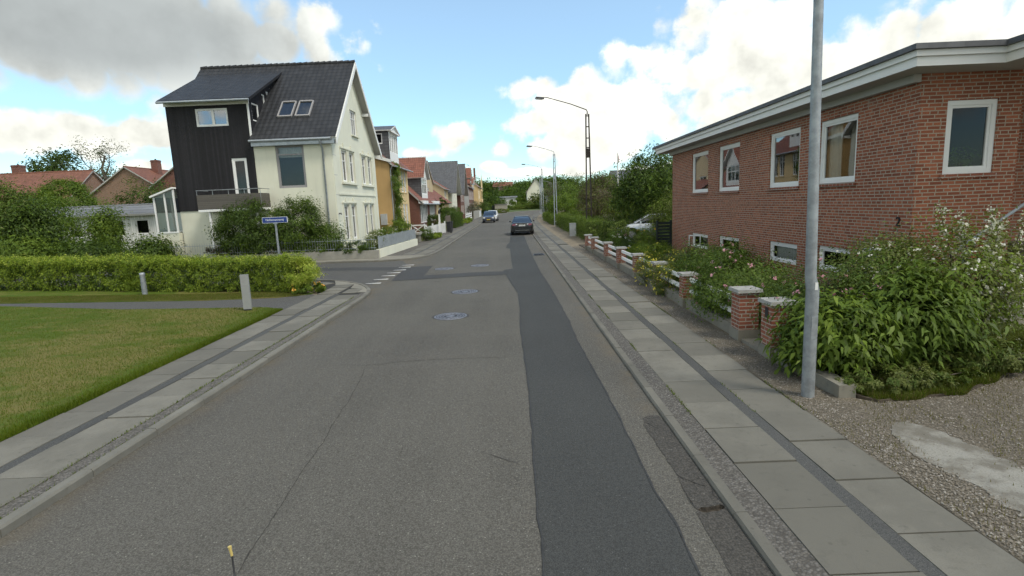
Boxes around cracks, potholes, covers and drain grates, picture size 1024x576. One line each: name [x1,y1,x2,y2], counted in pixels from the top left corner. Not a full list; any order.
manhole cover [431,312,469,321]
